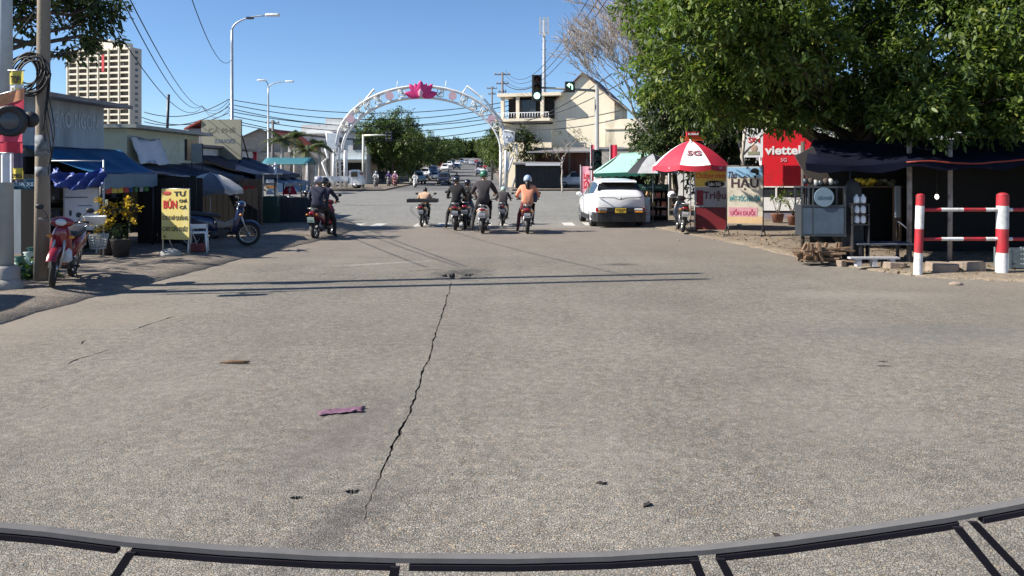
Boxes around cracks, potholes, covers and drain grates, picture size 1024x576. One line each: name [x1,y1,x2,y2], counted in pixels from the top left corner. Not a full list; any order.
crack [364,270,452,520]
